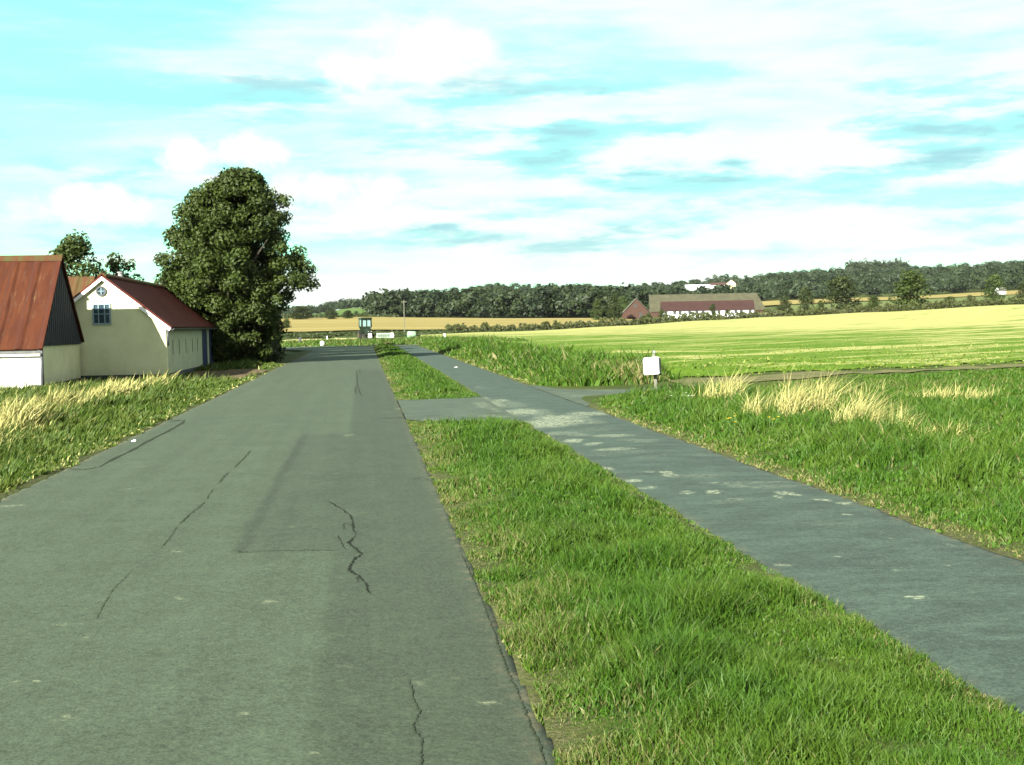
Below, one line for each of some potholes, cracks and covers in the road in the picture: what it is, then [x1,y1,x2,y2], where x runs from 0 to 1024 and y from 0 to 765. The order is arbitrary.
crack [160,450,251,548]
crack [409,680,423,765]
crack [238,501,370,593]
